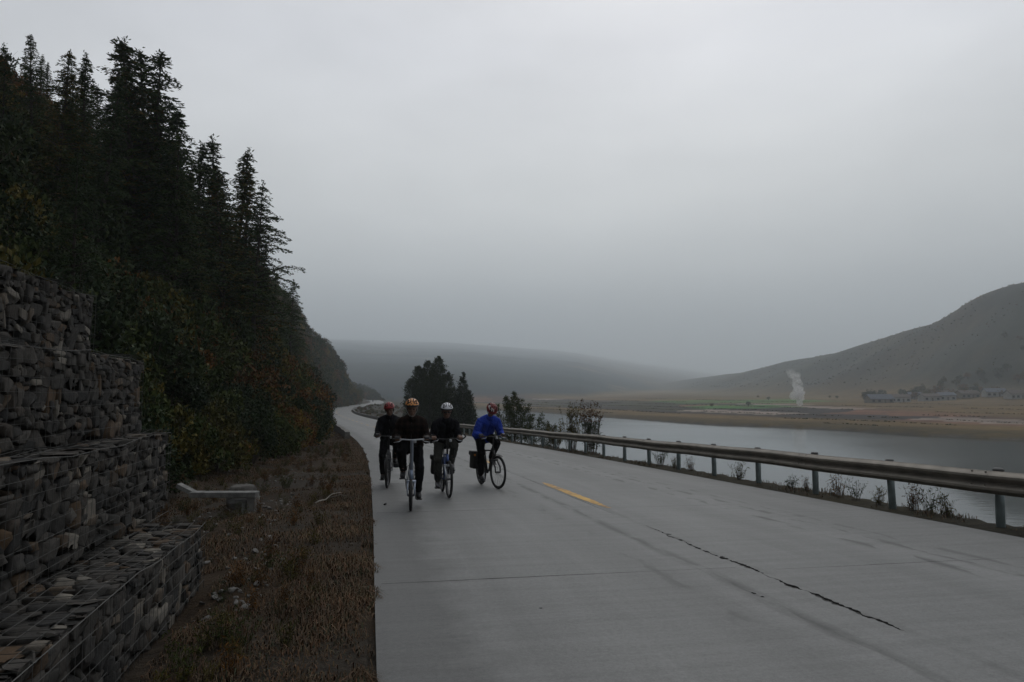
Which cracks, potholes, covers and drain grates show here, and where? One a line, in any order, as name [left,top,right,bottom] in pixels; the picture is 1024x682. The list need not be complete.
crack [643,524,901,630]
